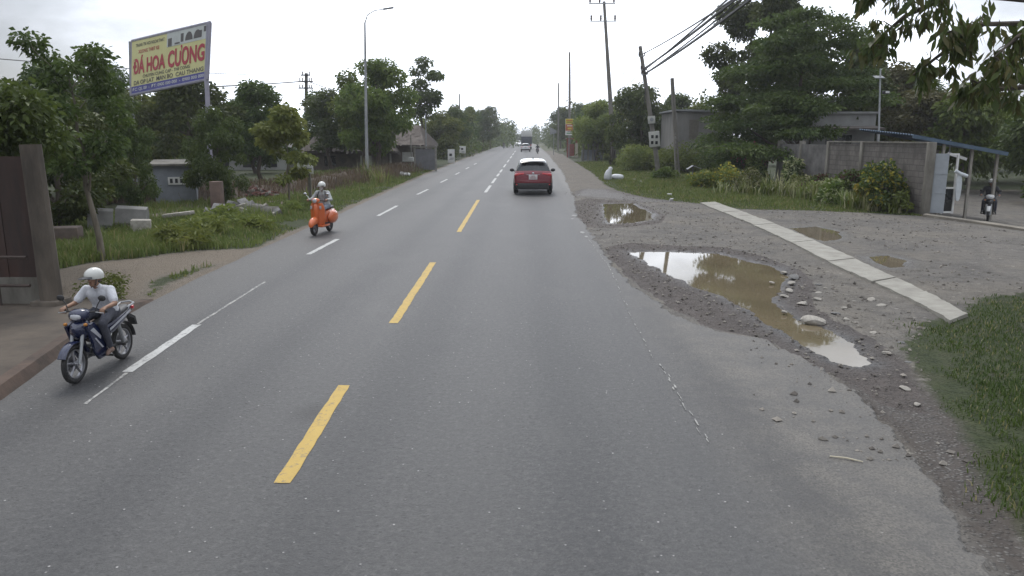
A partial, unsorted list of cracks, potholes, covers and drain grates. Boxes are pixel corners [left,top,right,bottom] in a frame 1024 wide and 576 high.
pothole [574,198,666,228]
pothole [782,224,857,244]
pothole [604,243,930,414]
